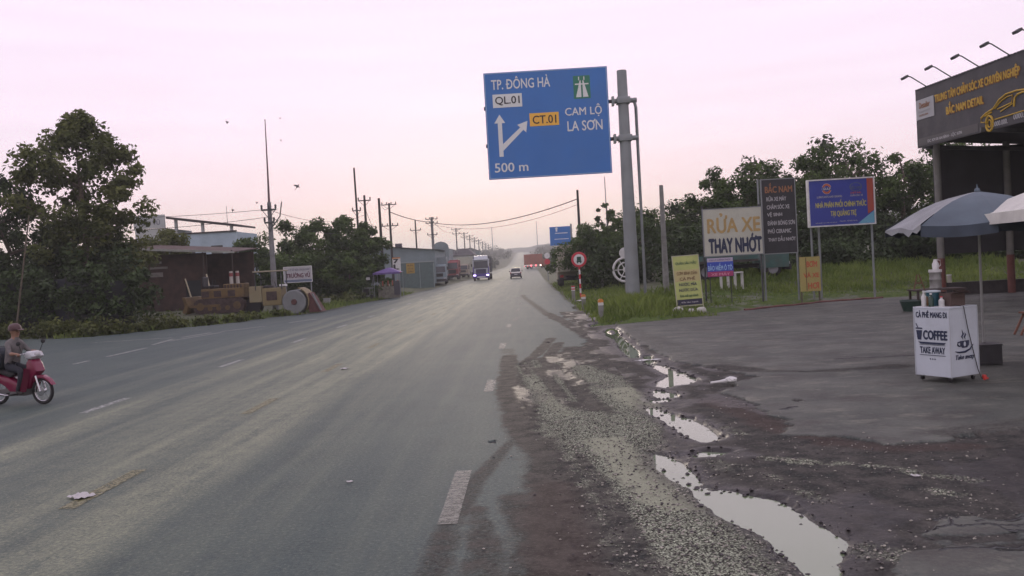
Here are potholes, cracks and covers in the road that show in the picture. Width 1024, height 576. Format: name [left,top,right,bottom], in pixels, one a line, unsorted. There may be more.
pothole [637,404,732,444]
crack [921,516,1024,551]
pothole [677,484,866,576]
pothole [642,449,715,493]
pothole [647,363,705,389]
